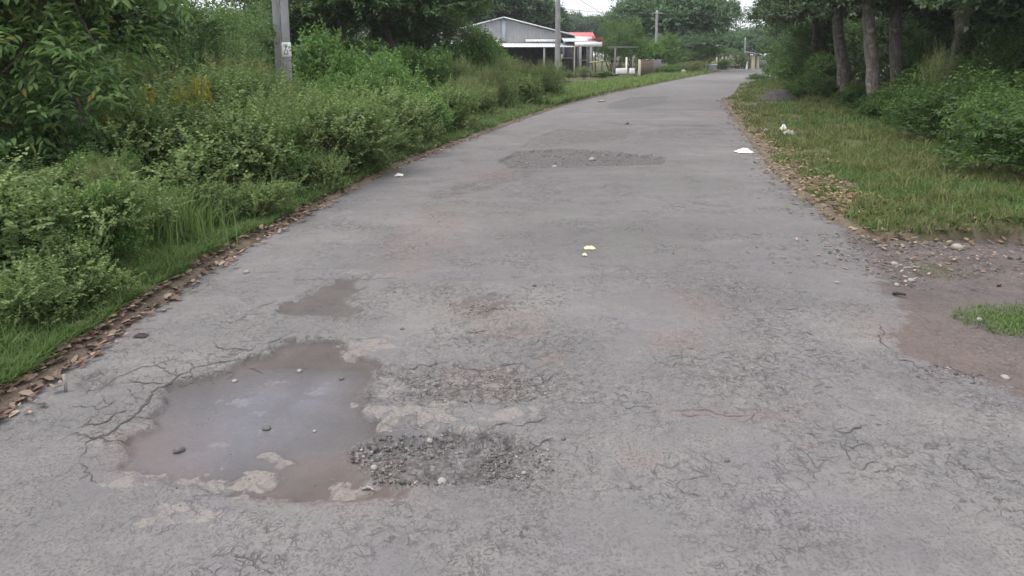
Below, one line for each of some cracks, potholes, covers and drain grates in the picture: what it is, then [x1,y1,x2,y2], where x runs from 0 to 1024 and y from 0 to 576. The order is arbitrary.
crack [654,452,728,495]
crack [69,336,283,482]
crack [655,347,797,396]
pothole [365,360,559,408]
crack [790,332,854,410]
crack [764,414,902,499]
crack [673,409,755,421]
pothole [105,337,443,504]
pothole [346,432,519,485]
pothole [275,278,364,318]
